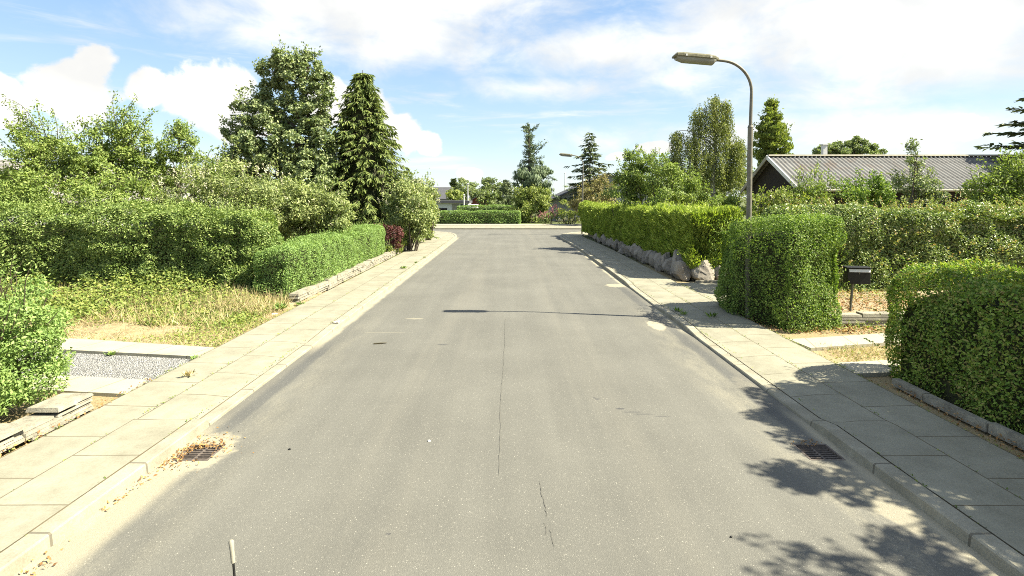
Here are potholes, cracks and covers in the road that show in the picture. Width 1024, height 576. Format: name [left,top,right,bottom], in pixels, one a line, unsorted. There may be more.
drain grate [792,444,846,460]
drain grate [173,444,226,461]
